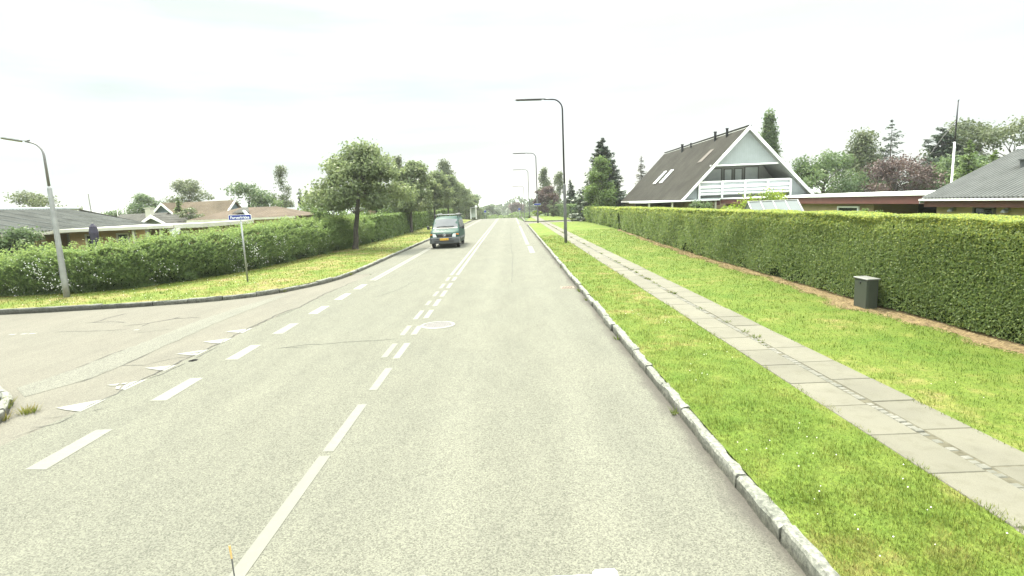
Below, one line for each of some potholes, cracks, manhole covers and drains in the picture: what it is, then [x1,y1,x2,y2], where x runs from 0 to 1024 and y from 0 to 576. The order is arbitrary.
crack [67,313,179,333]
manhole cover [421,321,455,329]
